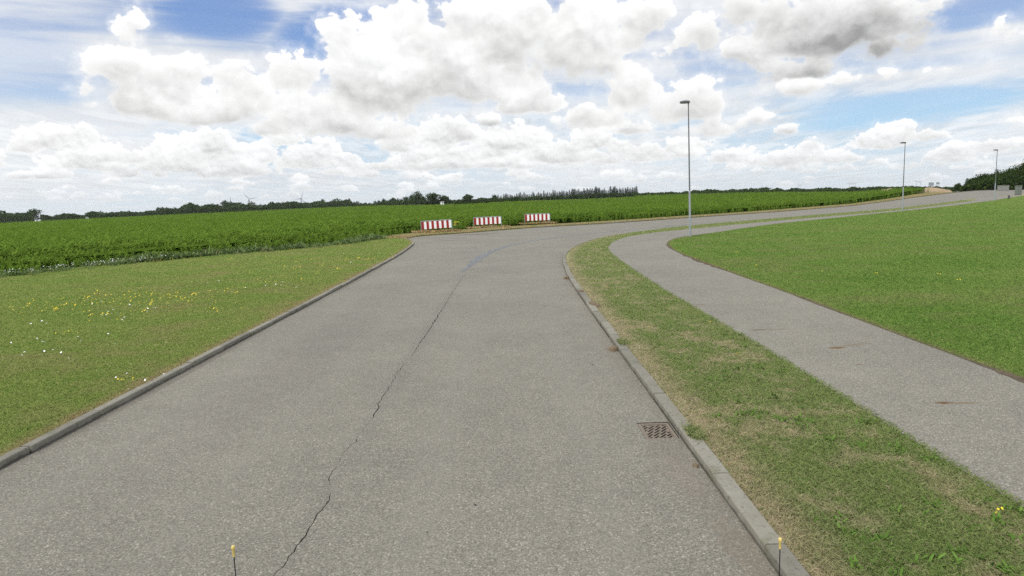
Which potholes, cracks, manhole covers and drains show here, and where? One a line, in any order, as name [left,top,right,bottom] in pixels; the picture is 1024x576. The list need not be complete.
crack [273,439,357,576]
drain grate [637,422,679,439]
crack [373,275,465,418]
